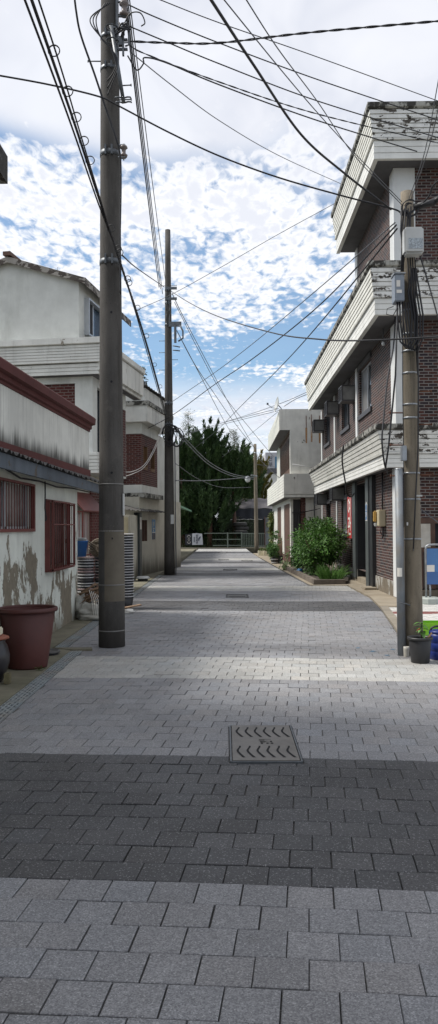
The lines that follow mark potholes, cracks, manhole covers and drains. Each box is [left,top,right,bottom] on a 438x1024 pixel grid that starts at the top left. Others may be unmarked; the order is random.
drain grate [8,680,47,703]
manhole cover [229,725,303,765]
drain grate [0,701,23,723]
drain grate [34,664,67,682]
drain grate [55,651,82,665]
